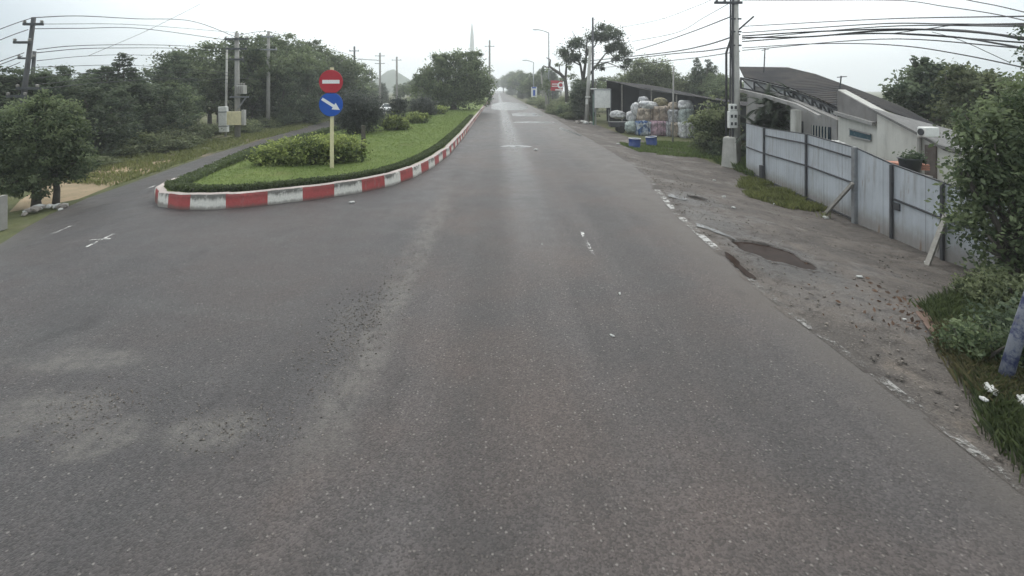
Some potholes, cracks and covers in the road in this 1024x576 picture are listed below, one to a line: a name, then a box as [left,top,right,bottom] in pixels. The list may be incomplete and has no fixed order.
pothole [722,236,827,273]
